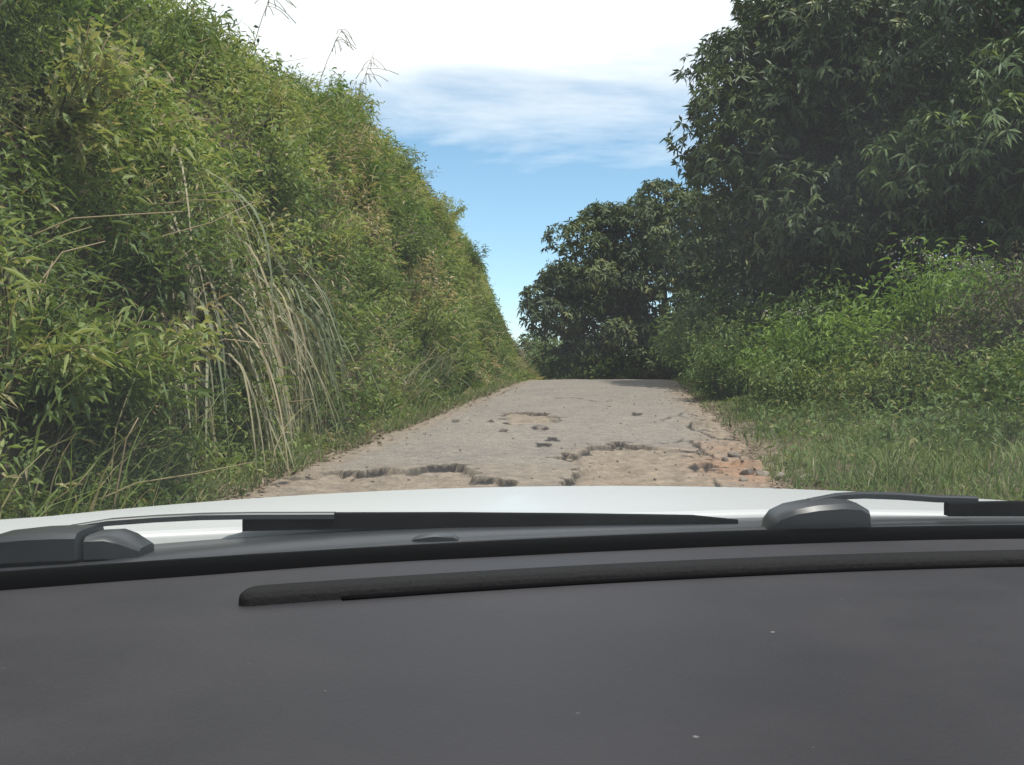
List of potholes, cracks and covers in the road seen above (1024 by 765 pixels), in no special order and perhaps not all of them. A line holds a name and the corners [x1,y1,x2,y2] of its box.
crack [656,412,735,456]
pothole [545,441,731,487]
pothole [261,462,520,496]
pothole [496,411,568,426]
